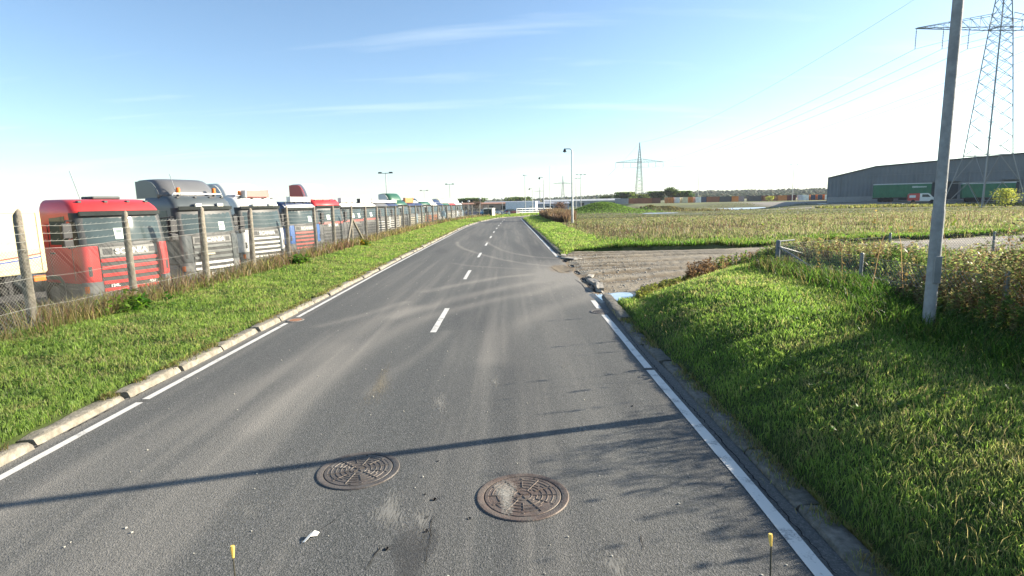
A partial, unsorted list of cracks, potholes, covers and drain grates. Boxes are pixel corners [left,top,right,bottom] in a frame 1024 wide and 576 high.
manhole cover [316,452,400,490]
manhole cover [476,473,569,522]
